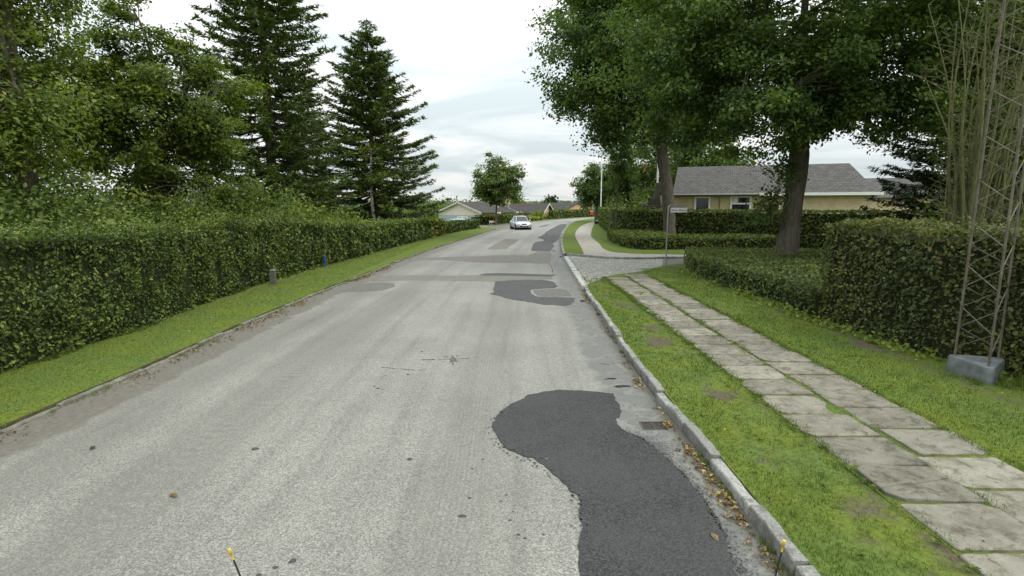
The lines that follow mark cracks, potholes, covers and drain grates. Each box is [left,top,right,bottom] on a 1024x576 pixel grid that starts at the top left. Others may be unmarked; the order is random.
drain grate [638,421,669,430]
